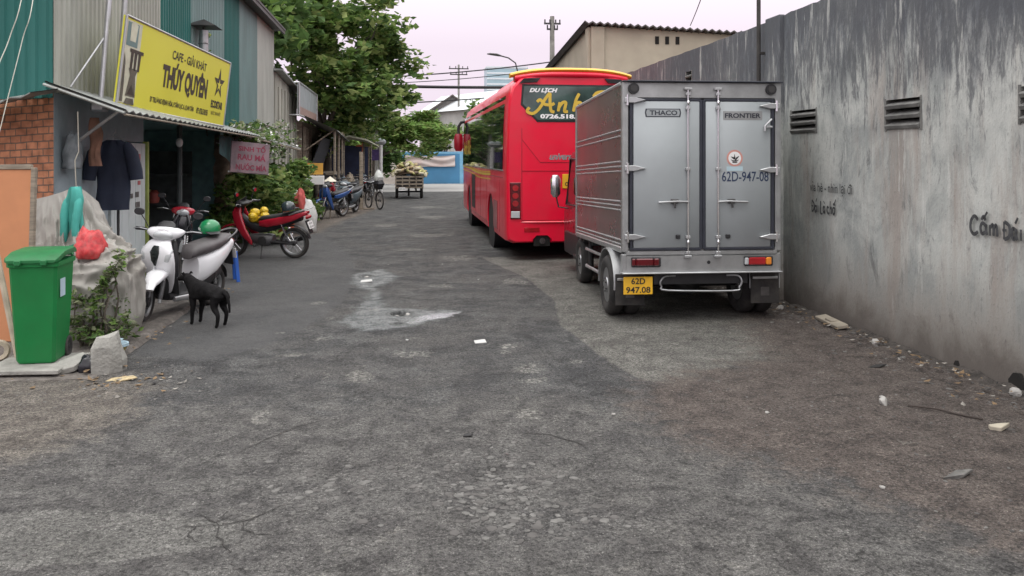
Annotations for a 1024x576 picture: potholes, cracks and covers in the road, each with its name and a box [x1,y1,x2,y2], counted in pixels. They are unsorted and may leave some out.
crack [184,504,285,552]
